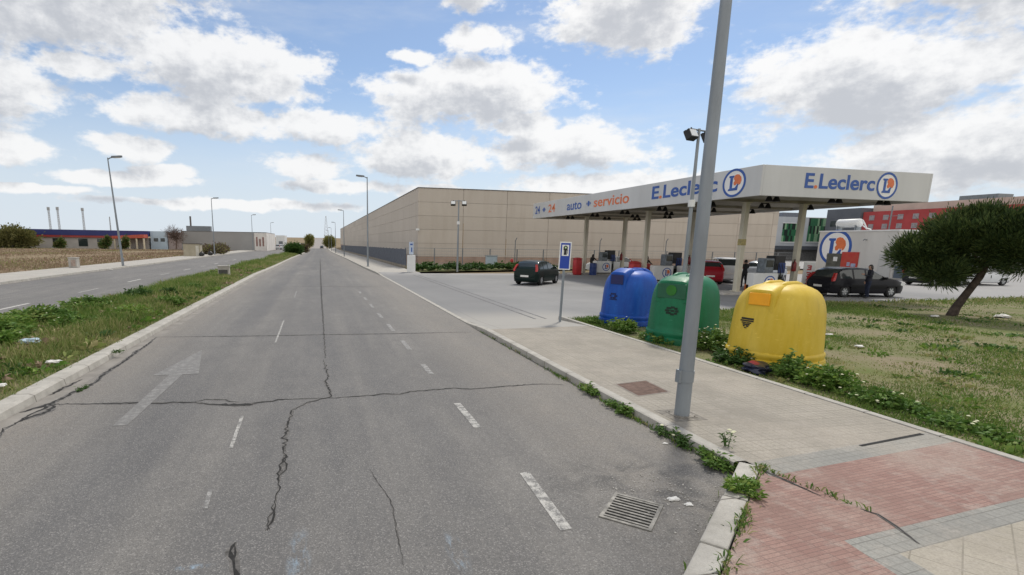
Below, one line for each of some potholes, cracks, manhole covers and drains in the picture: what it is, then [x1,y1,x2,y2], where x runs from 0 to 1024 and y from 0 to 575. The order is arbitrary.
crack [370,469,404,565]
drain grate [599,492,664,532]
crack [225,542,240,575]
crack [0,337,561,531]
manhole cover [615,380,670,397]
